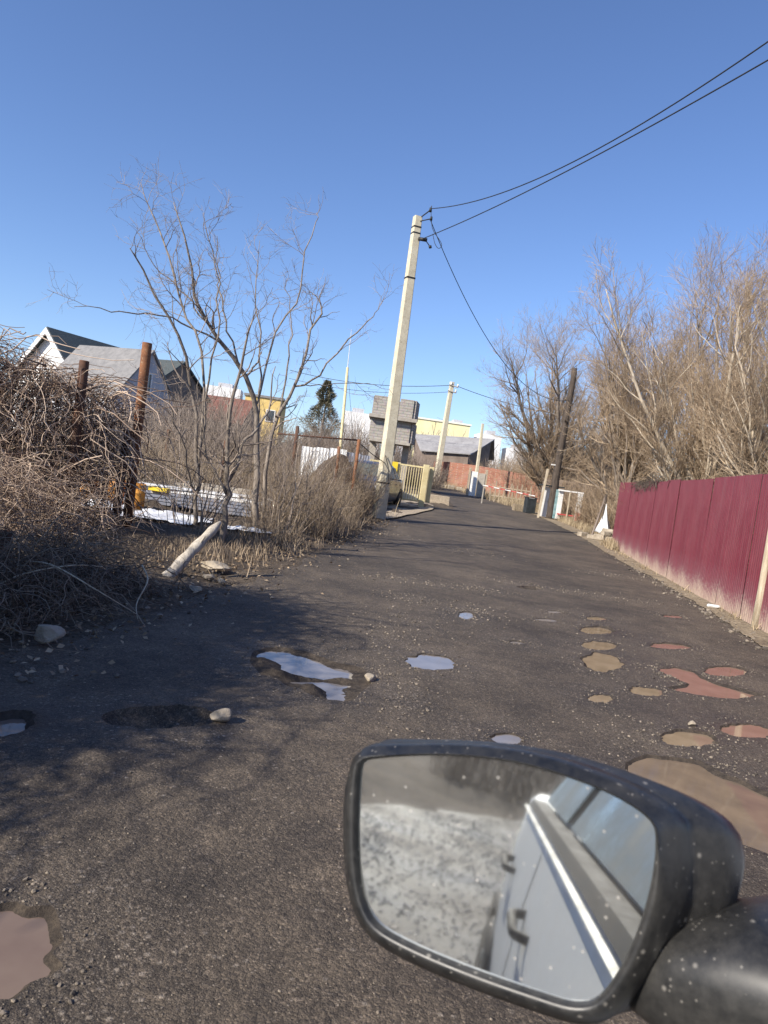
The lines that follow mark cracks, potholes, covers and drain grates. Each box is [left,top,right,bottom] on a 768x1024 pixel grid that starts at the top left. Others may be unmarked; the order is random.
pothole [0,902,63,999]
pothole [458,611,476,619]
pothole [489,733,524,744]
pothole [250,647,372,701]
pothole [404,653,457,670]
pothole [0,710,36,737]
pothole [101,704,215,729]
